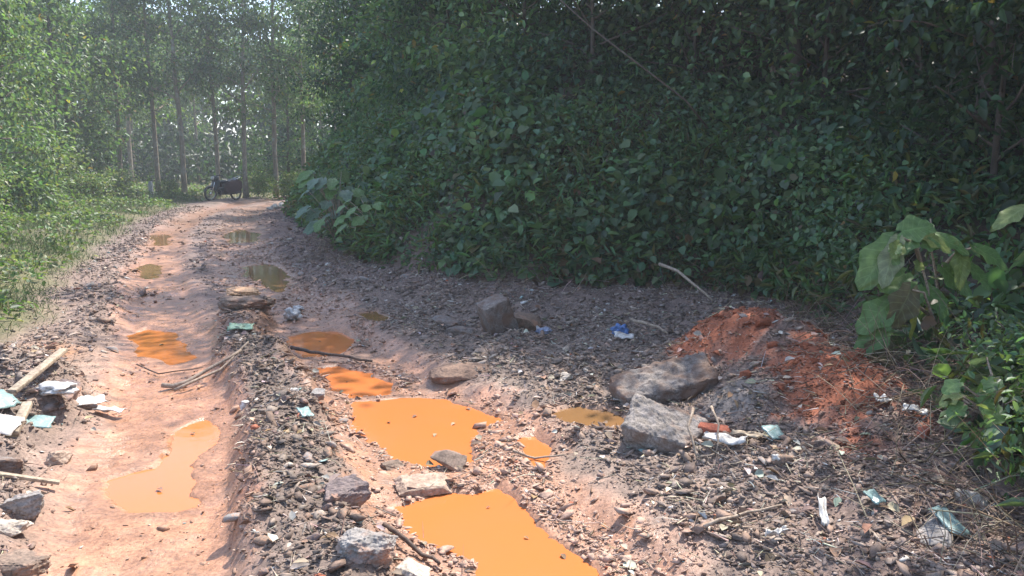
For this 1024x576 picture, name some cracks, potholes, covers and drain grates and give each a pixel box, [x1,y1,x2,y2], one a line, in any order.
pothole [281,323,367,359]
pothole [98,411,231,515]
pothole [126,260,178,280]
pothole [144,231,186,246]
pothole [119,325,209,366]
pothole [233,258,306,300]
pothole [389,478,620,576]
pothole [309,363,400,399]
pothole [351,307,396,321]
pothole [215,228,273,244]
pothole [550,402,626,429]
